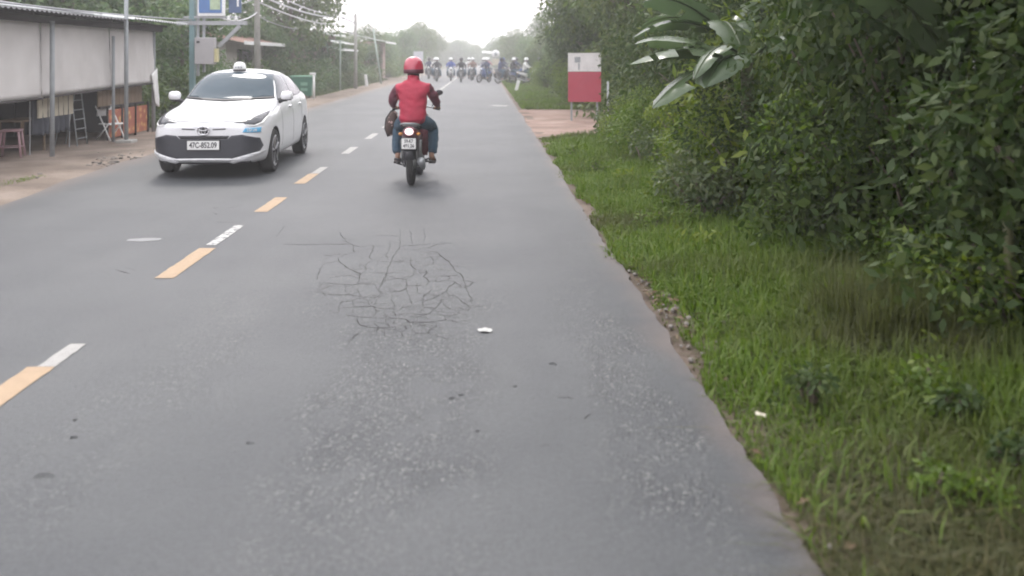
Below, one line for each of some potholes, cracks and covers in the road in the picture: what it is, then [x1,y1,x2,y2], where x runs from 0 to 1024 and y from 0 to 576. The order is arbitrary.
crack [282,229,490,347]
